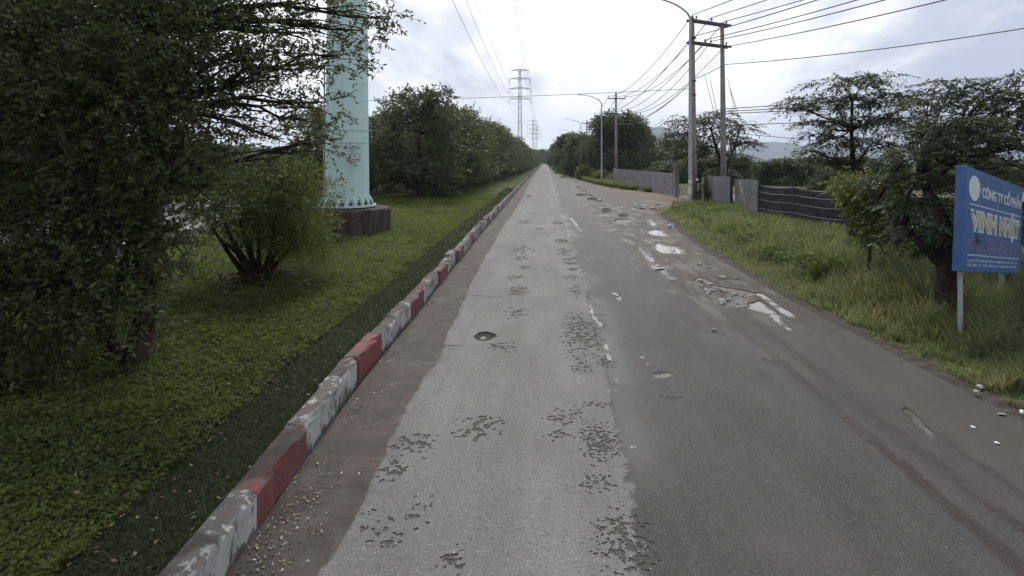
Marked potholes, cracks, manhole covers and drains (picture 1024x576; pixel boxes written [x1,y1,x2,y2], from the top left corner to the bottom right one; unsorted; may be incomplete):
pothole [902,407,936,439]
pothole [651,242,688,254]
pothole [693,277,755,308]
pothole [745,300,794,331]
pothole [474,331,497,341]
pothole [755,292,797,319]
